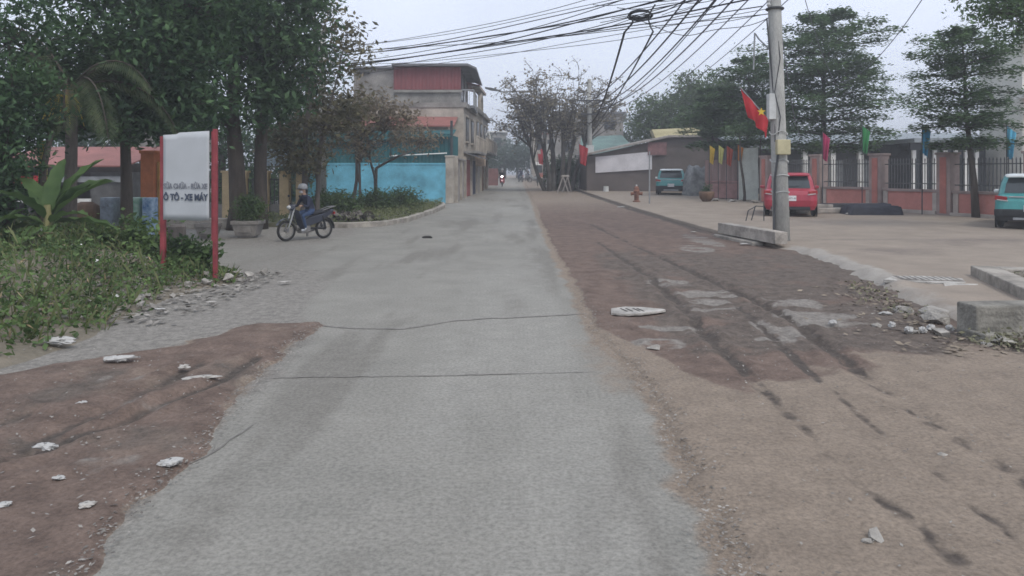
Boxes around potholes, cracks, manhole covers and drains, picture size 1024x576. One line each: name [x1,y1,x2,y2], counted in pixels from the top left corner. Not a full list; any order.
crack [327,313,586,329]
crack [189,422,256,464]
